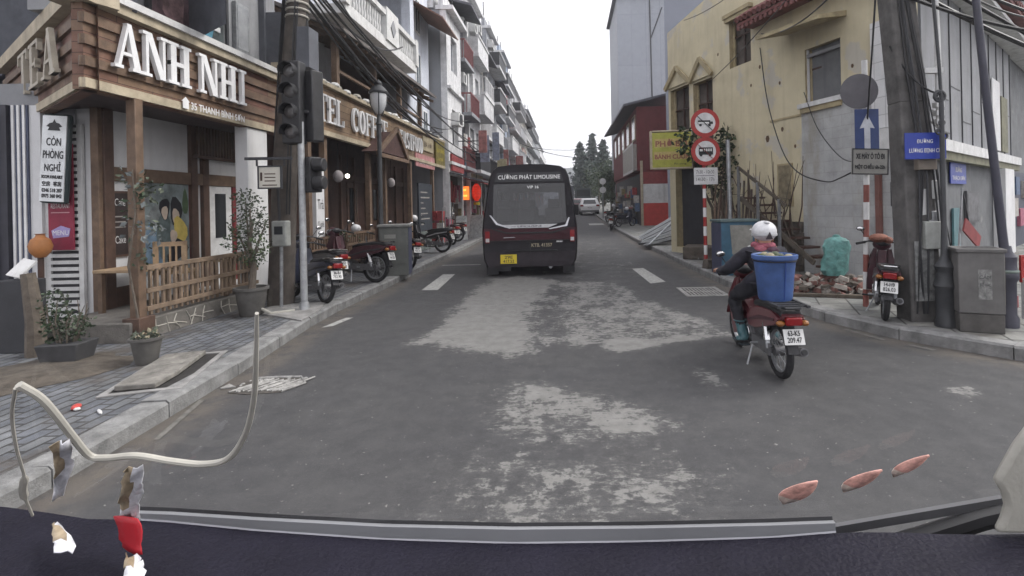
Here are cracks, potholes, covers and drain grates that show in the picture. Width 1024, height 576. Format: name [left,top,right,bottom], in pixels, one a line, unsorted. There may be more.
drain grate [676,287,728,297]
drain grate [220,376,315,395]
